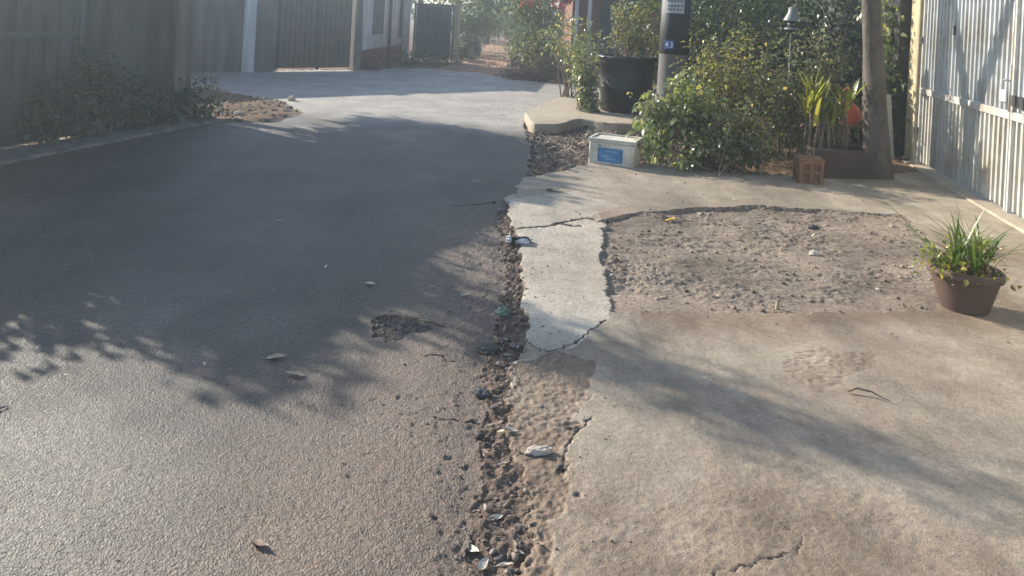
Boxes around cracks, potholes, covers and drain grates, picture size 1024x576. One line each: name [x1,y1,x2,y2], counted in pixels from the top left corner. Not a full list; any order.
crack [507,218,609,233]
crack [712,527,805,576]
pothole [370,315,433,343]
